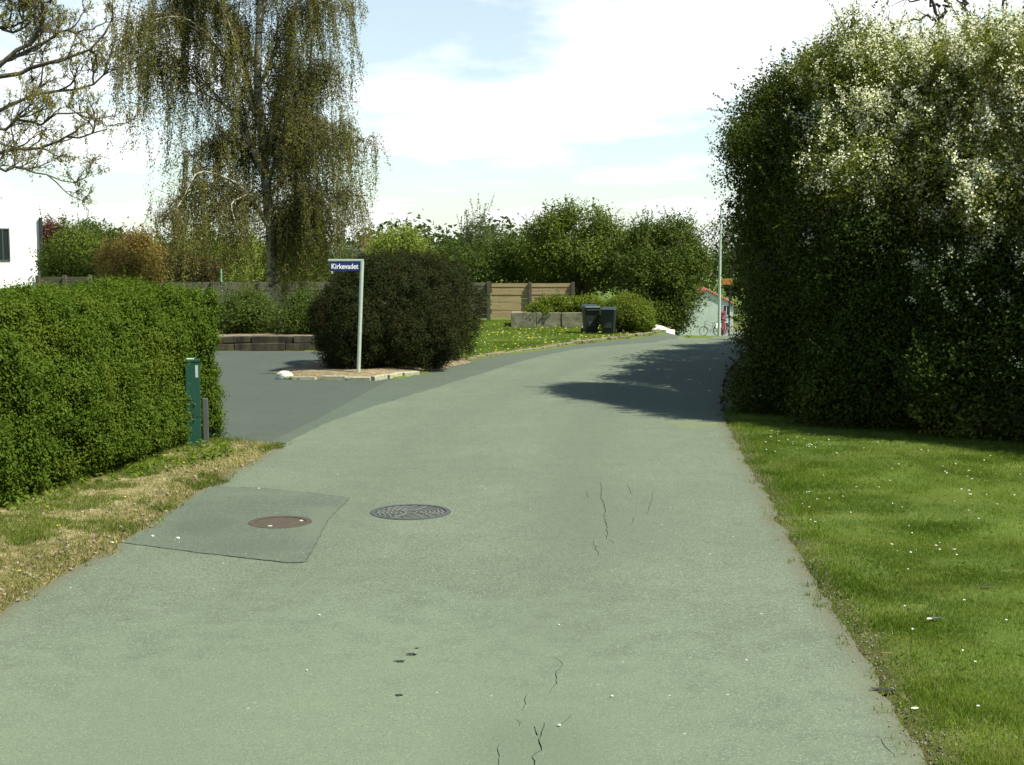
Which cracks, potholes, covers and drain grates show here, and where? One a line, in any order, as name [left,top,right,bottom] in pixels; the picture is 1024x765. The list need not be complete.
manhole cover [370,504,451,520]
crack [586,482,614,556]
manhole cover [248,516,312,528]
crack [497,696,545,765]
